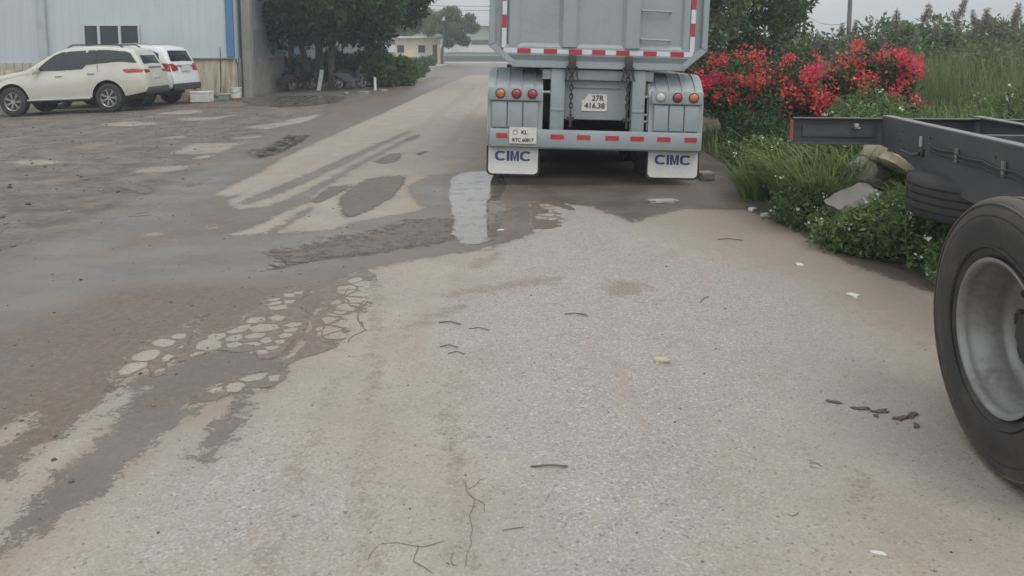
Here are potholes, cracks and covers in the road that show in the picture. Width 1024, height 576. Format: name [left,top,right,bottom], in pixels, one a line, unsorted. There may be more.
crack [368,478,485,572]
